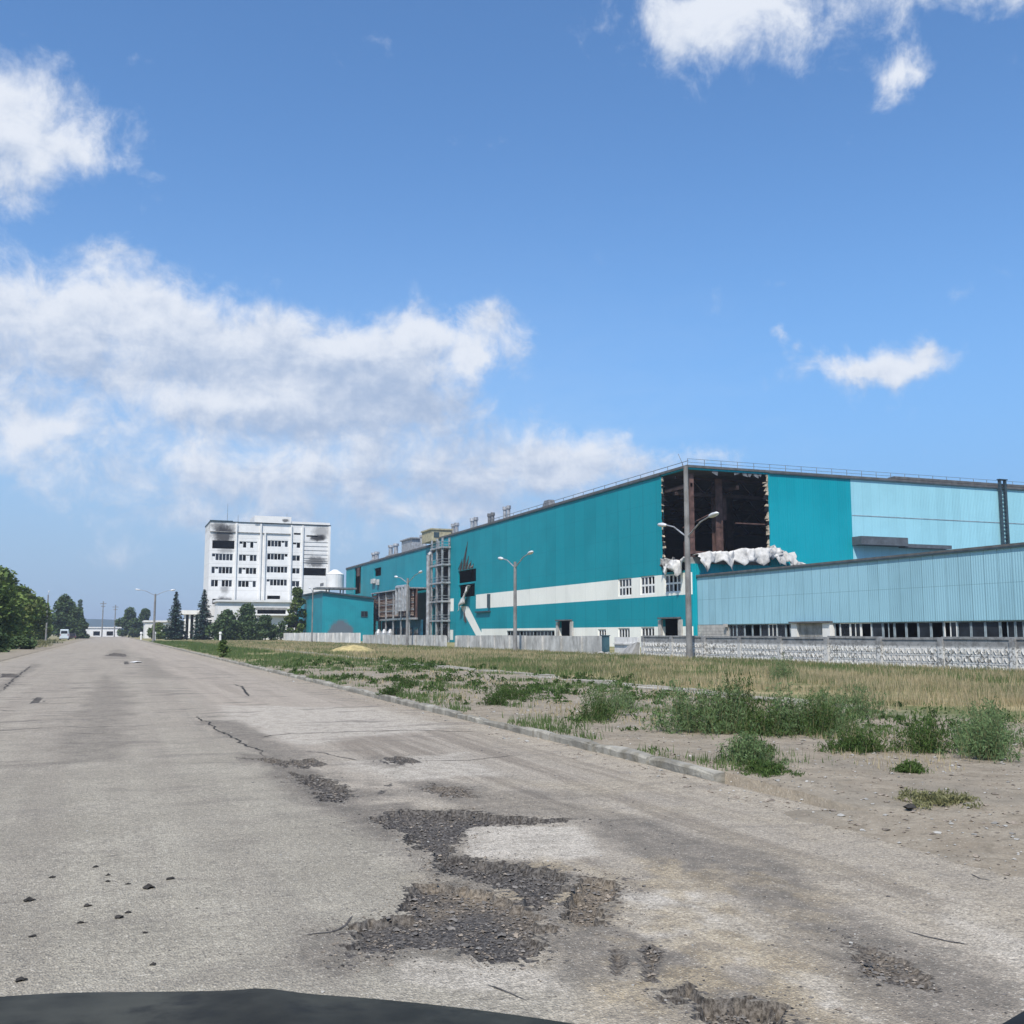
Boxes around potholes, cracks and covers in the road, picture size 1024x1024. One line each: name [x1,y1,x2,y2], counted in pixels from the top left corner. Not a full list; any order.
pothole [343,803,610,915]
pothole [809,926,977,1010]
pothole [275,770,378,806]
pothole [296,877,583,982]
crack [4,666,33,690]
pothole [373,754,440,766]
pothole [628,967,851,1024]
